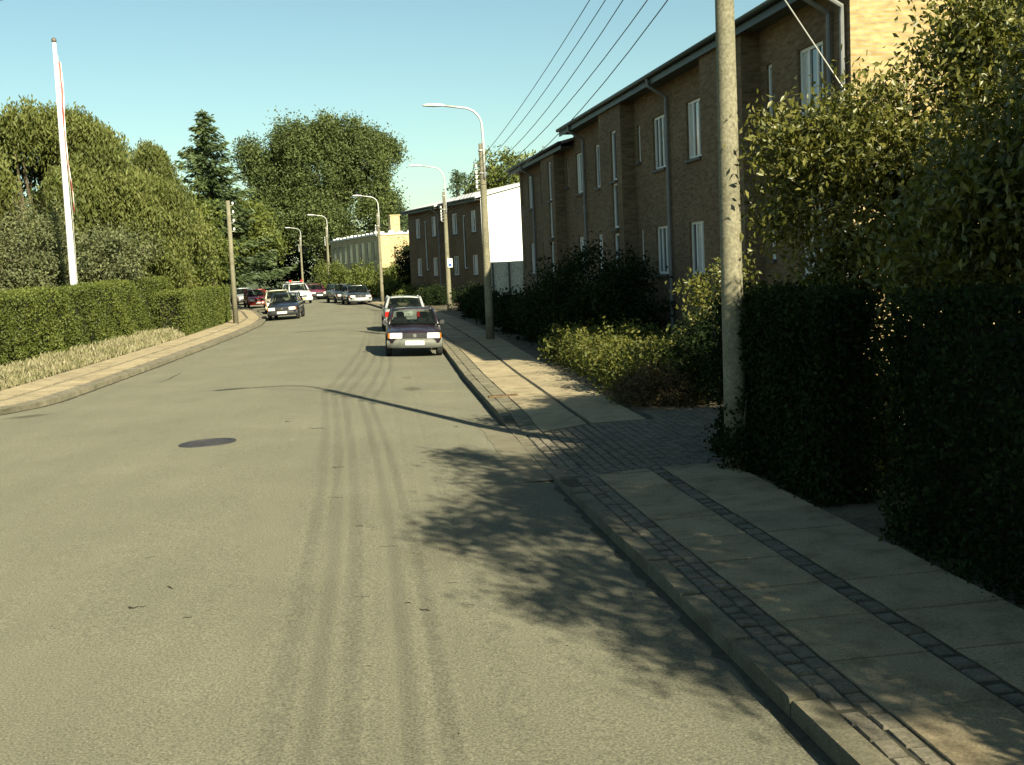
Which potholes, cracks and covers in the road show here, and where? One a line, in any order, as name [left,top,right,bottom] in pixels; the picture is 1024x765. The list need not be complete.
manhole cover [178,438,236,448]
